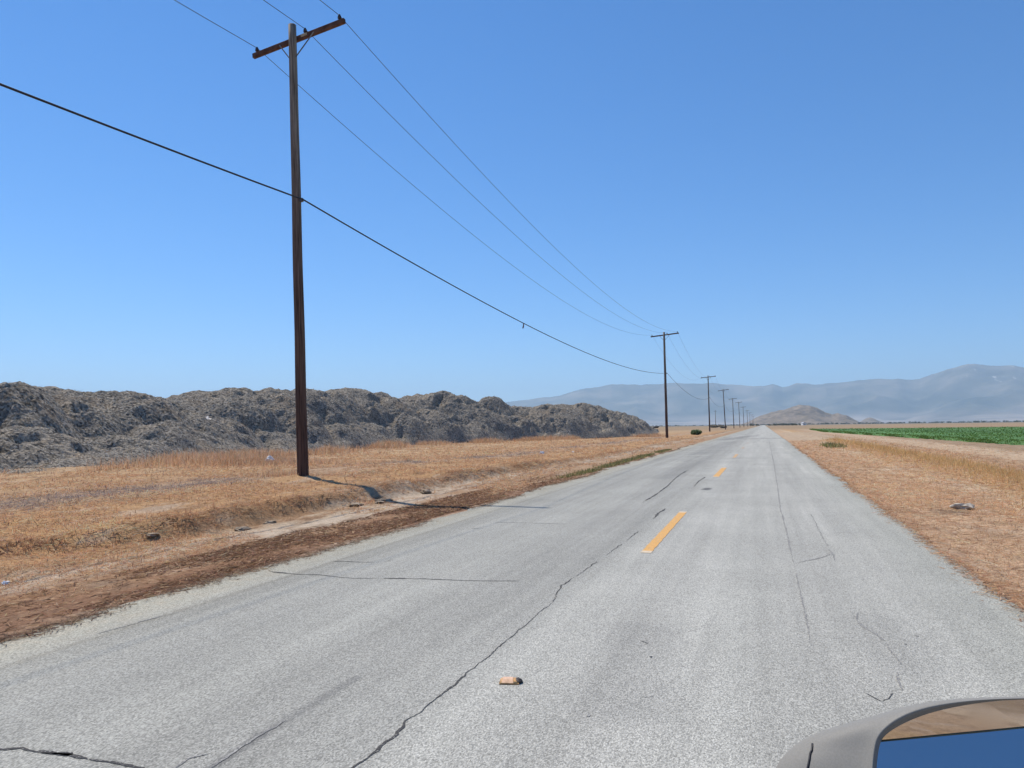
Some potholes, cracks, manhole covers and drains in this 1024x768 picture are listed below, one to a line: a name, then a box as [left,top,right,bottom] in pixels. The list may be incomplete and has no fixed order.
crack [856,612,903,701]
crack [769,442,835,642]
crack [645,471,705,518]
crack [270,561,477,581]
crack [0,747,145,768]
